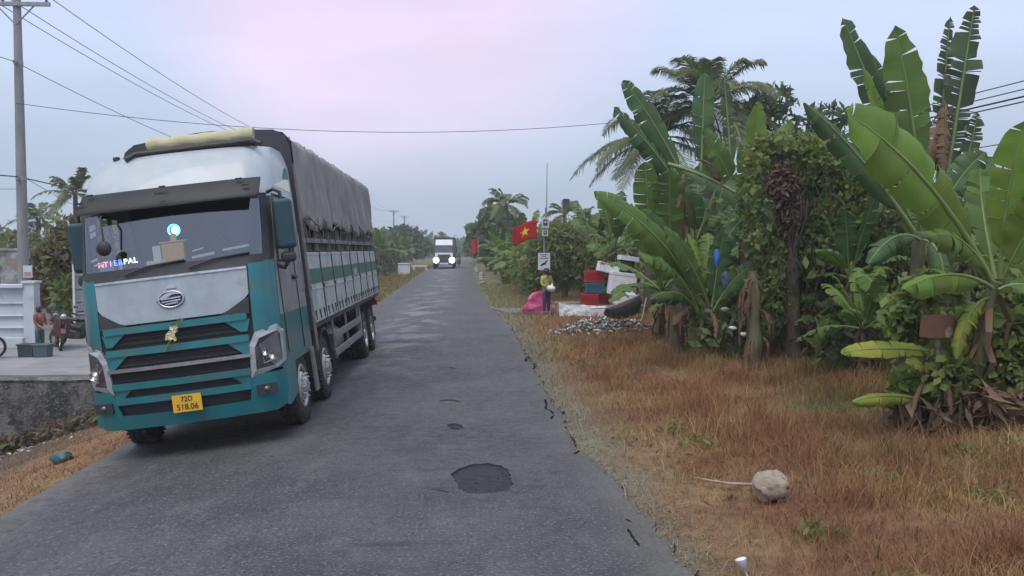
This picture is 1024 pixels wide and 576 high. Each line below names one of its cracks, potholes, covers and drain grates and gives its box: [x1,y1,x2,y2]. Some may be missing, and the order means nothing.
crack [626,519,640,546]
pothole [451,463,514,494]
crack [534,381,565,419]
